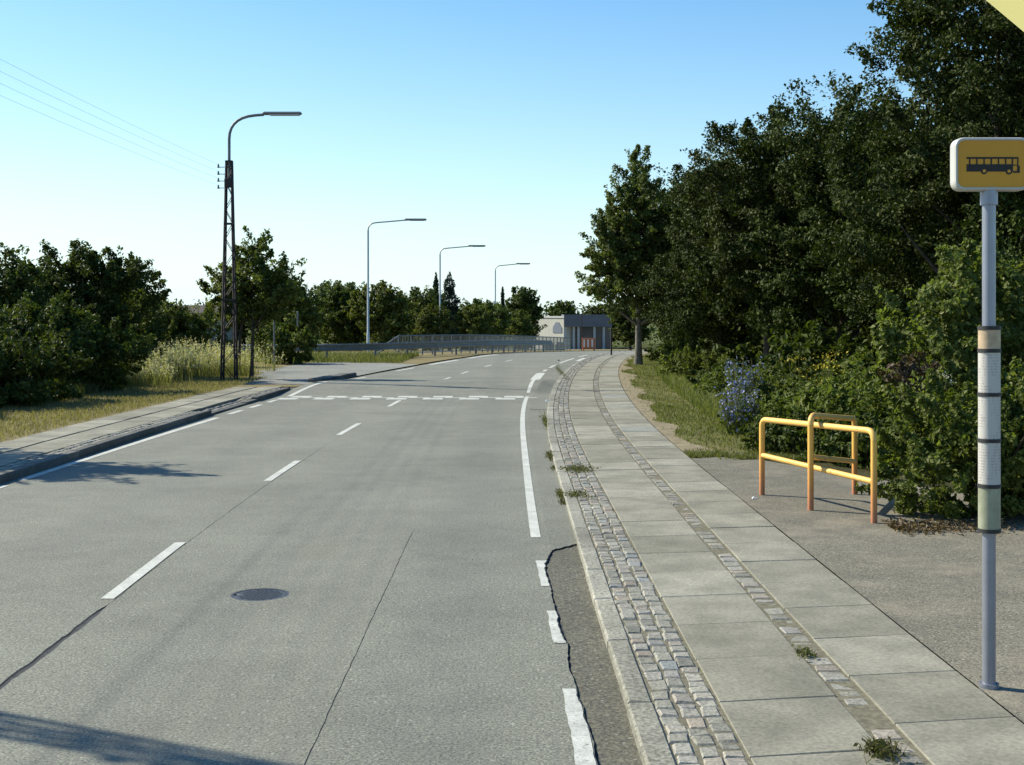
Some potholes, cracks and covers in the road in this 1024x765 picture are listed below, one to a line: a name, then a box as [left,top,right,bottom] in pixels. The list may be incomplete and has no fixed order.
manhole cover [231,588,289,601]
